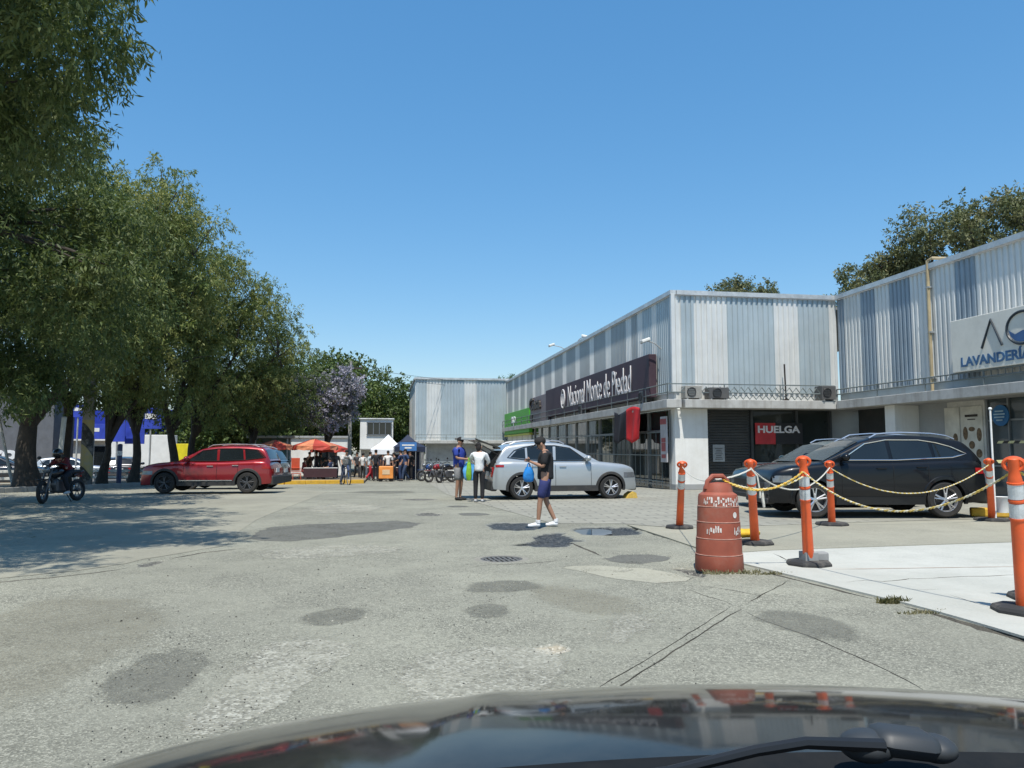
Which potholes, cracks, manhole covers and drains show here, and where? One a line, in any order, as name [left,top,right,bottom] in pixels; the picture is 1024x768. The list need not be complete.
crack [600,554,1002,690]
pothole [570,526,643,536]
